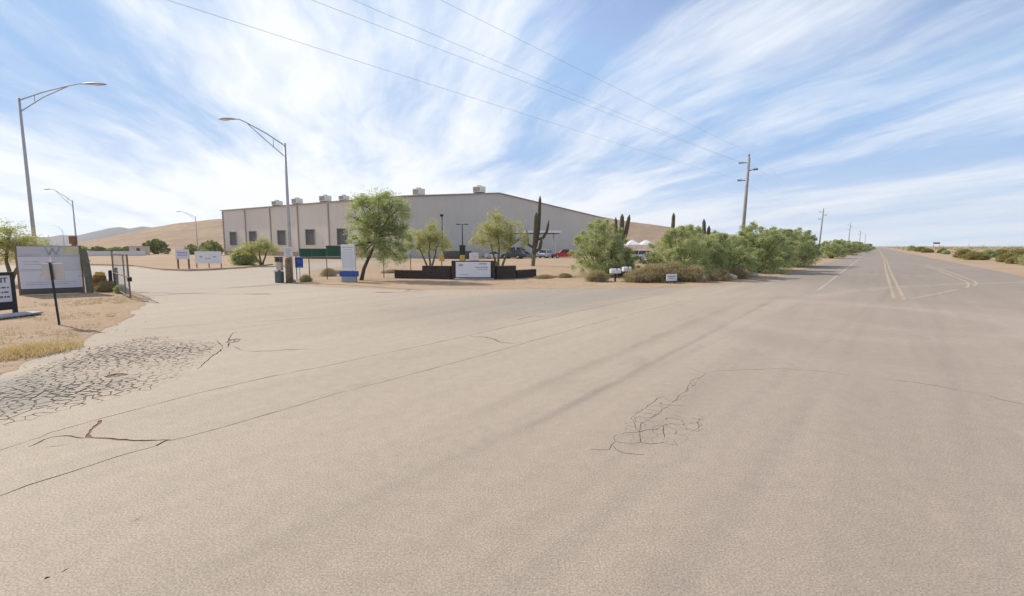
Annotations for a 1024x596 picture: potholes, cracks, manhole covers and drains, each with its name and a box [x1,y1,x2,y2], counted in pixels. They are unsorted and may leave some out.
crack [590,368,705,455]
crack [0,318,303,447]
